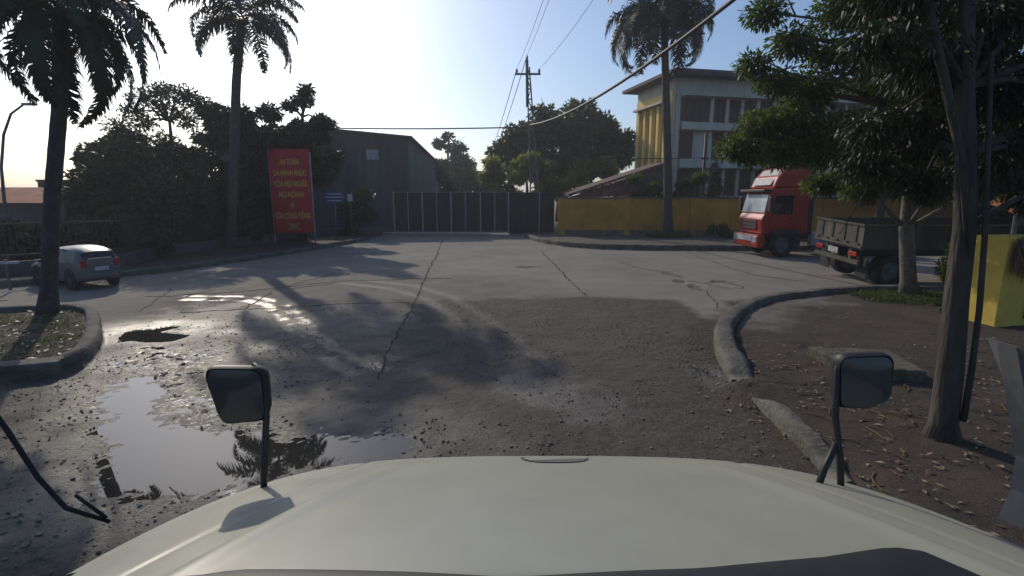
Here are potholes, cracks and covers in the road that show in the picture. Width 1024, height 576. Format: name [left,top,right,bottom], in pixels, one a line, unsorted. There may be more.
crack [542,252,586,296]
crack [140,273,429,312]
pothole [90,375,414,504]
